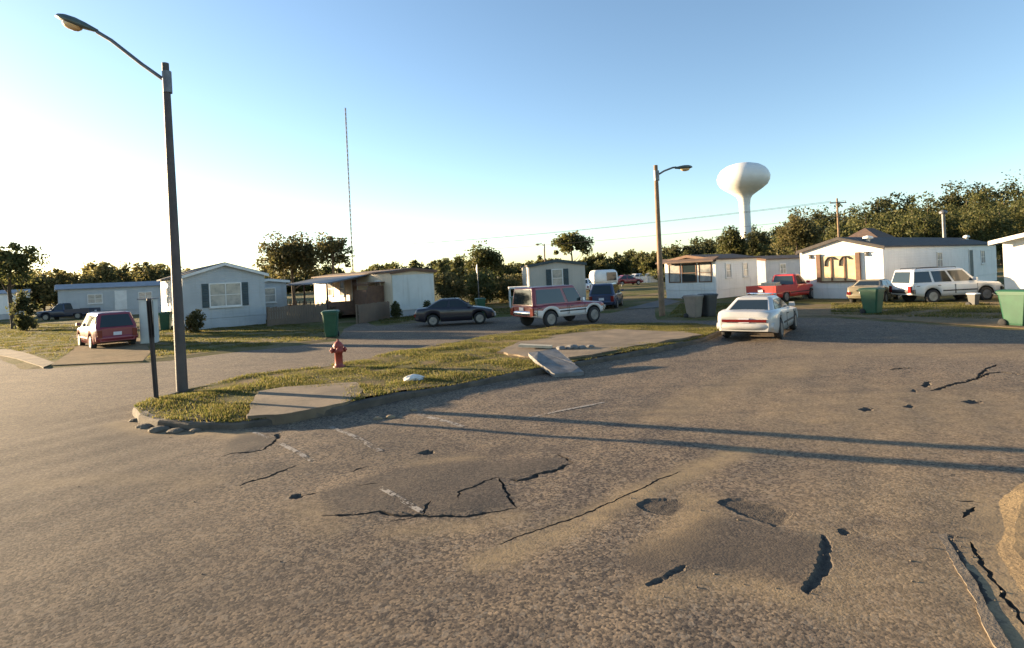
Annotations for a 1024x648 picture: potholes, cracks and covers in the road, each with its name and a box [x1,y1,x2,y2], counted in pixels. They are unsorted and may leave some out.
pothole [714,498,793,528]
pothole [645,565,687,587]
pothole [800,533,834,595]
crack [970,542,1024,625]
crack [930,365,1023,391]
pothole [636,498,687,516]
crack [221,439,573,521]
